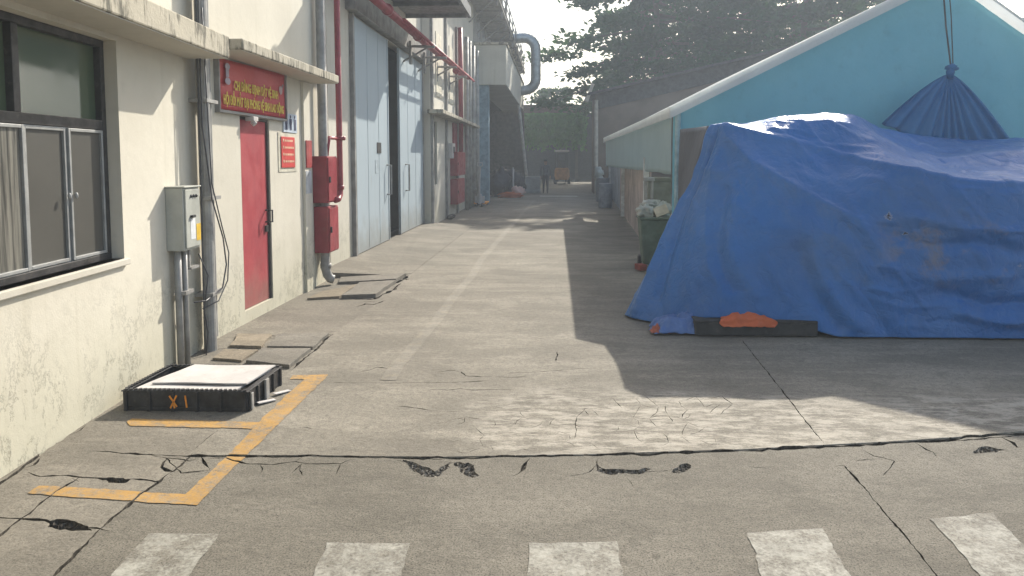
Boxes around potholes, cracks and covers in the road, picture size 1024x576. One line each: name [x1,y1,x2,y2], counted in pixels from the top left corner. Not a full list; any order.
crack [0,426,346,485]
pothole [572,460,650,476]
crack [451,408,598,476]
pothole [398,460,459,477]
pothole [973,446,1004,454]
pothole [646,463,691,473]
crack [333,353,585,390]
crack [615,395,731,443]
pothole [444,461,479,478]
crack [0,517,108,531]
